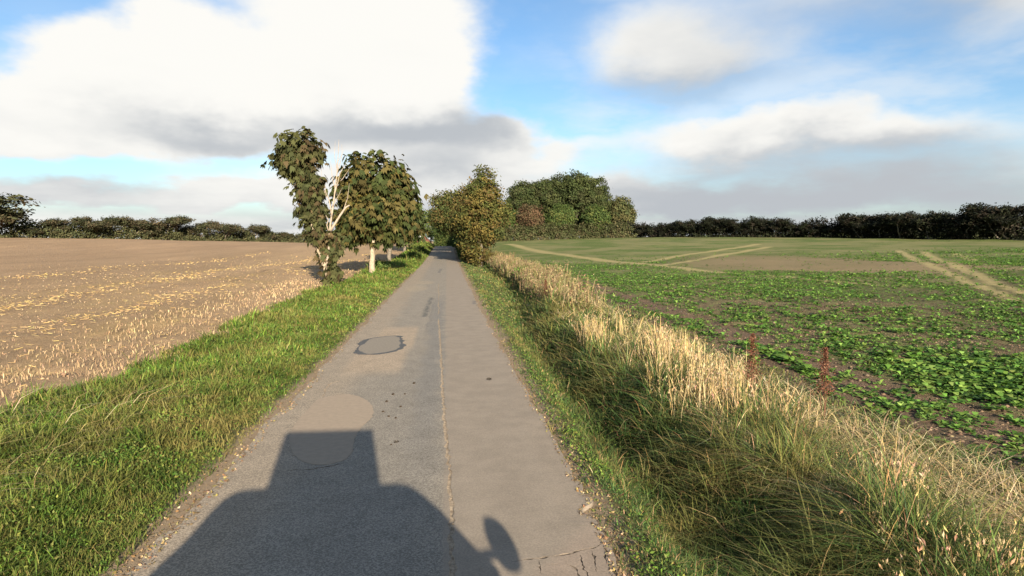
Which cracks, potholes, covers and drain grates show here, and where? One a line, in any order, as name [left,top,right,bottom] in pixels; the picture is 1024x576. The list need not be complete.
crack [513,544,618,576]
